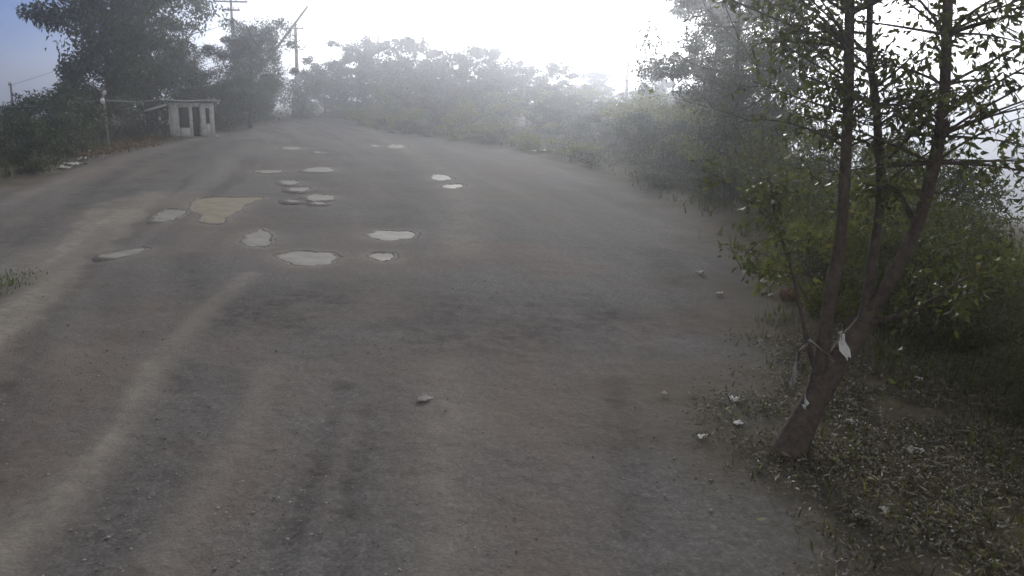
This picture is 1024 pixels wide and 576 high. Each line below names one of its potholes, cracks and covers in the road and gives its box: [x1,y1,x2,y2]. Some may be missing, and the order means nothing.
pothole [274,250,342,266]
pothole [187,196,270,225]
pothole [146,208,190,224]
pothole [298,193,342,203]
pothole [281,186,318,194]
pothole [91,247,150,261]
pothole [365,252,398,262]
pothole [239,228,278,247]
pothole [362,229,420,242]
